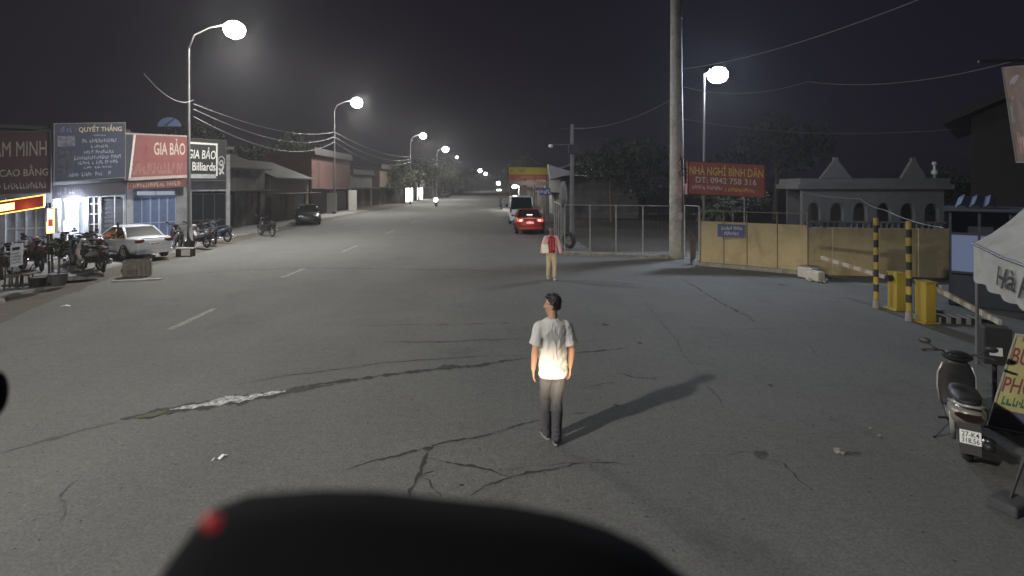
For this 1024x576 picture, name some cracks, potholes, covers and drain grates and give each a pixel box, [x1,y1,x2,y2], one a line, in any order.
crack [343,420,621,497]
crack [720,451,813,491]
crack [58,479,78,524]
crack [684,281,762,325]
